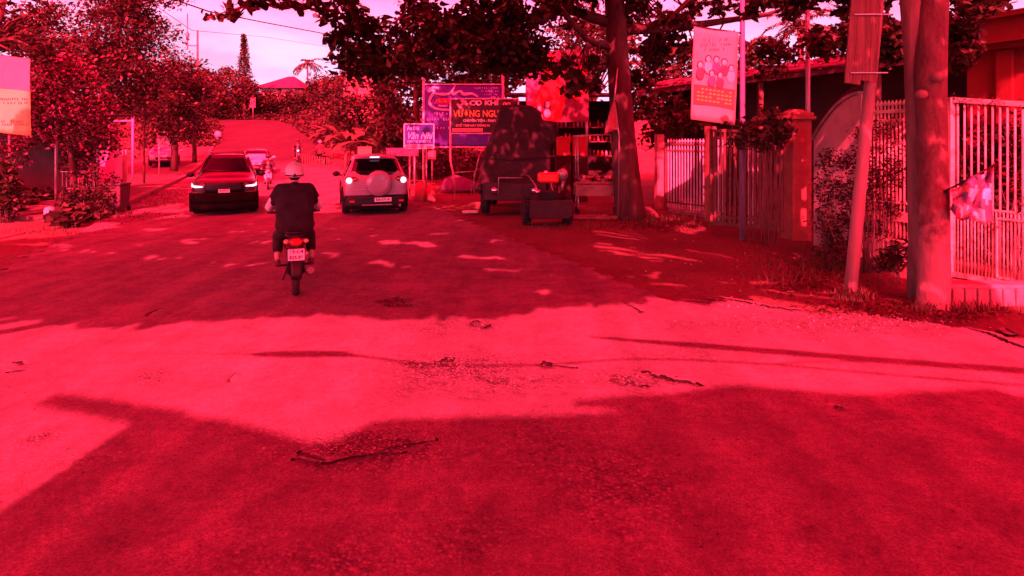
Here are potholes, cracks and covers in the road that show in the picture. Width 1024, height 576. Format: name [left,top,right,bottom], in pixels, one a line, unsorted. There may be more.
crack [960,326,1024,350]
pothole [399,358,437,370]
pothole [433,355,460,367]
pothole [372,296,418,309]
crack [292,437,438,470]
crack [625,372,696,388]
pothole [465,319,489,327]
pothole [534,359,560,371]
crack [680,295,809,312]
